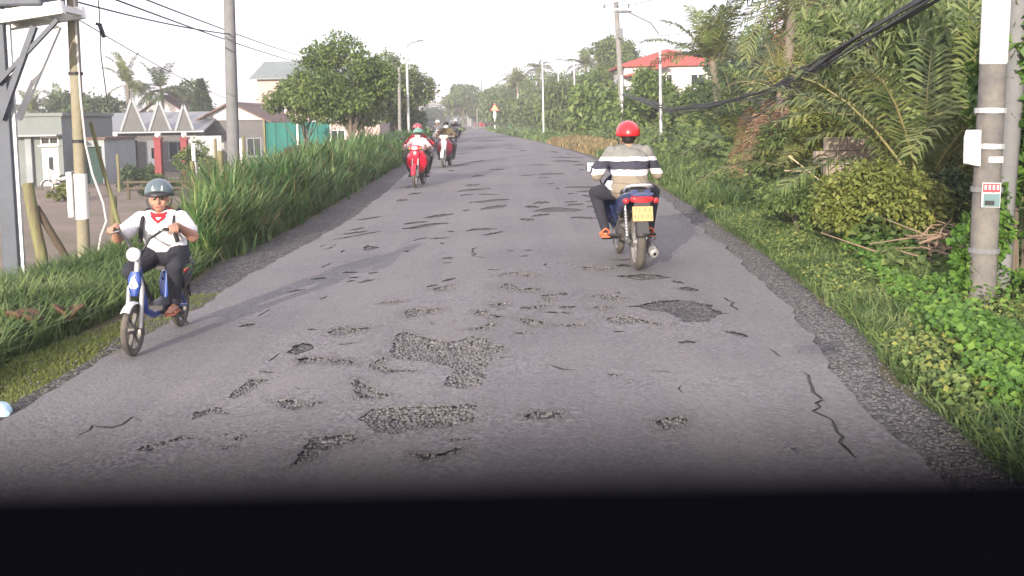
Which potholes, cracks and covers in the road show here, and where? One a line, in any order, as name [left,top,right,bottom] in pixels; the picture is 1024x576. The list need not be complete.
pothole [303,433,359,447]
pothole [276,398,324,410]
pothole [369,357,415,374]
pothole [326,326,370,336]
pothole [228,379,268,399]
pothole [192,406,230,420]
pothole [358,403,478,434]
pothole [525,411,561,420]
pothole [351,378,392,399]
crack [803,372,845,438]
pothole [287,343,314,355]
pothole [389,331,505,389]
